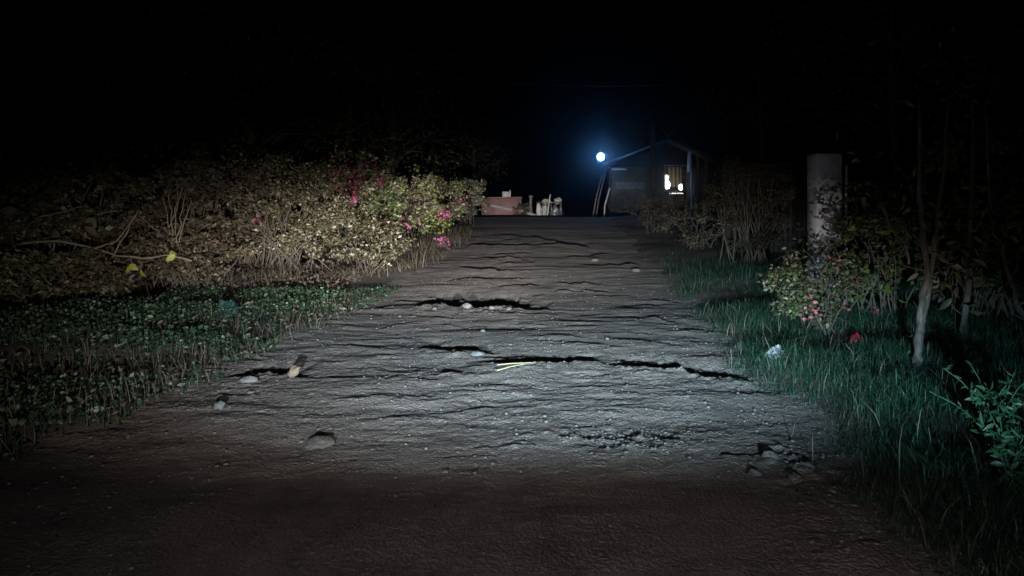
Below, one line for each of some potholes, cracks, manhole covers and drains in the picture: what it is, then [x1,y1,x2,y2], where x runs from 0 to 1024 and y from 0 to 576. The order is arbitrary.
crack [719,442,780,456]
crack [378,234,703,346]
